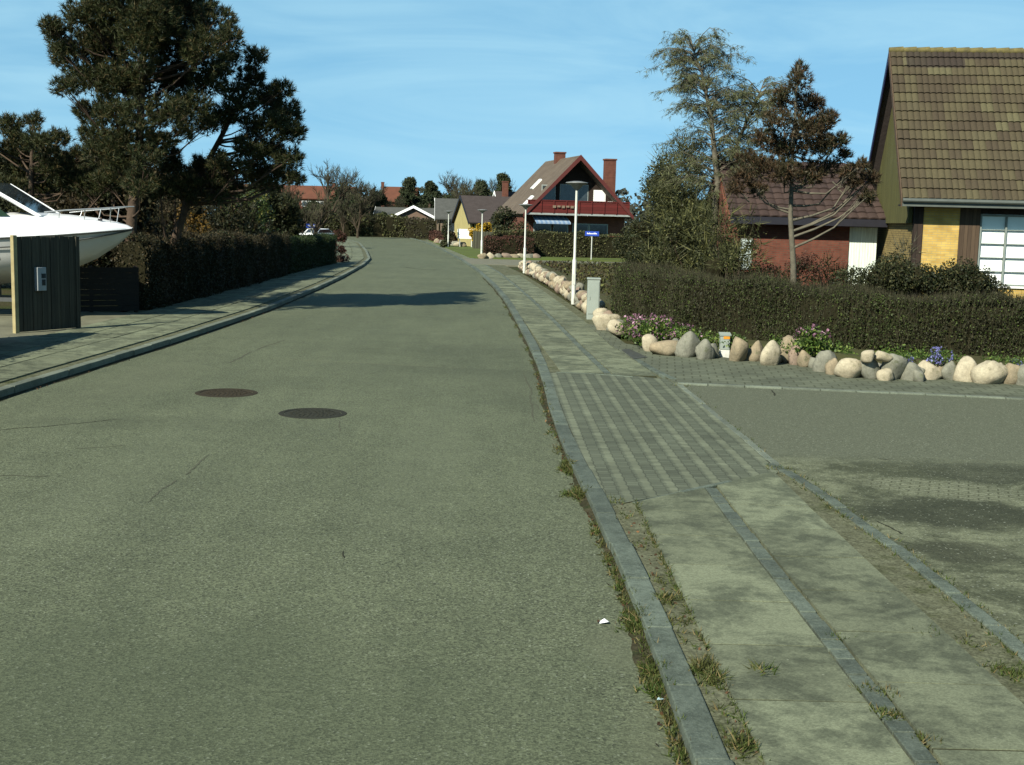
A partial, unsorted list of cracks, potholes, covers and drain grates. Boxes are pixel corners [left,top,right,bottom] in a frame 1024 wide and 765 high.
crack [524,375,540,424]
manhole cover [278,408,347,419]
manhole cover [195,388,258,397]
crack [149,455,208,502]
